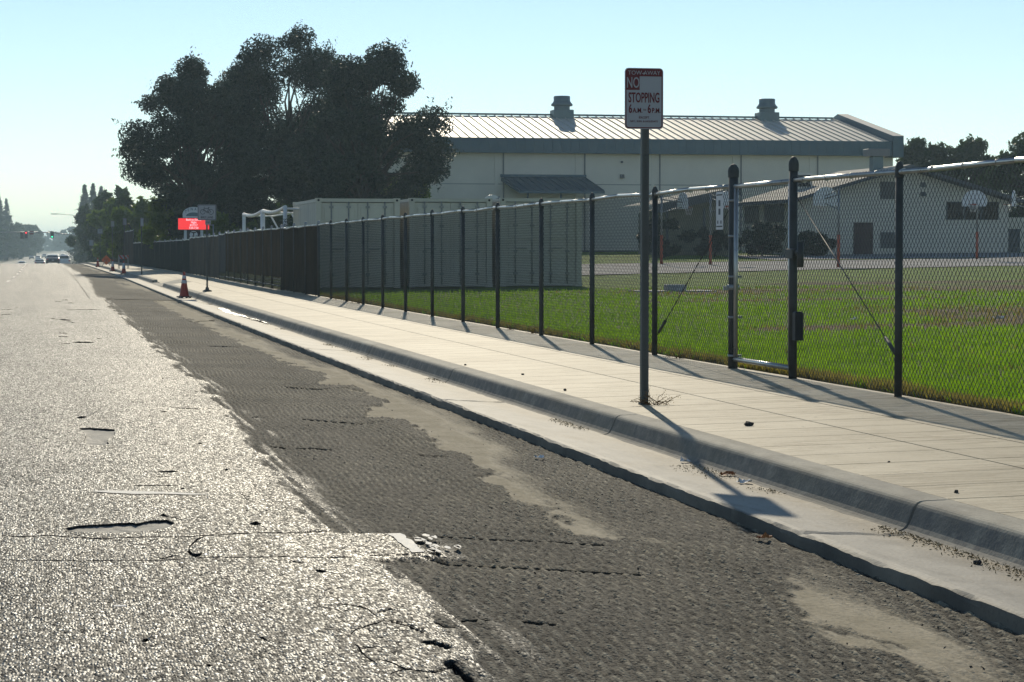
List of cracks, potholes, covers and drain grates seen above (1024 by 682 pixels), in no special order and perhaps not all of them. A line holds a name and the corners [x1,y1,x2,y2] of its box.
crack [3,532,641,588]
crack [312,588,556,675]
pothole [65,517,175,533]
pothole [79,428,115,445]
